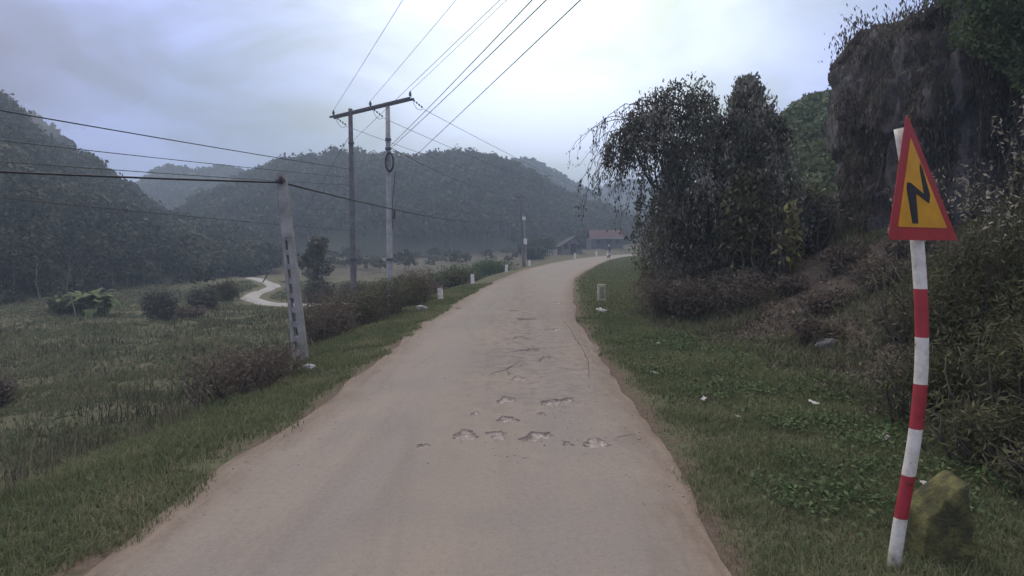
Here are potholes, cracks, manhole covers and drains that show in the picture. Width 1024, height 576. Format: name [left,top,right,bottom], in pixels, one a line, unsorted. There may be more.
pothole [582,437,613,448]
pothole [540,397,575,407]
pothole [495,415,521,423]
pothole [452,429,479,440]
pothole [518,431,555,443]
pothole [485,431,507,440]
